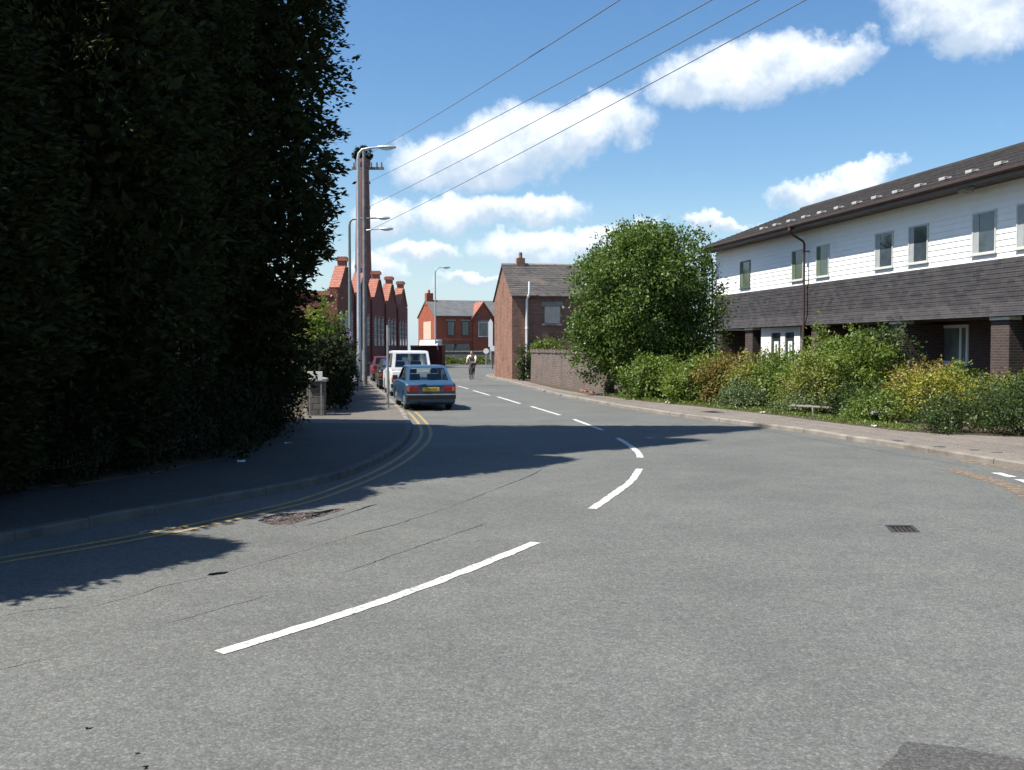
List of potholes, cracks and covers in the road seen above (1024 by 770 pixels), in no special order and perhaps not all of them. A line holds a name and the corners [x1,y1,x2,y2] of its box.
pothole [259,508,344,525]
crack [346,524,483,572]
